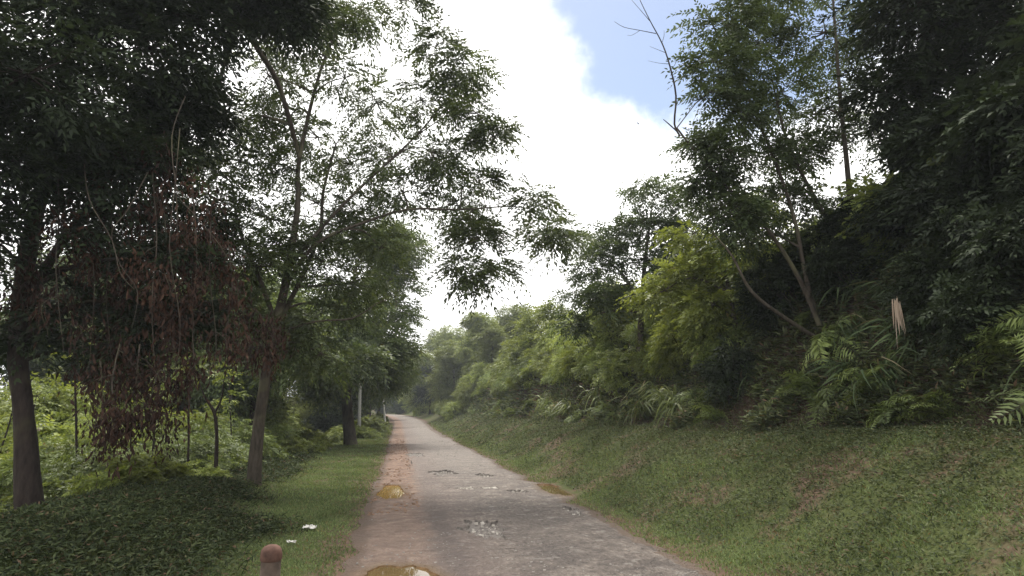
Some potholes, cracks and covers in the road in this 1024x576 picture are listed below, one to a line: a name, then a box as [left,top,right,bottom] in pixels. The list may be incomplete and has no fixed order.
pothole [376,485,404,499]
pothole [561,506,582,515]
pothole [364,565,440,576]
pothole [537,484,574,496]
pothole [455,519,508,540]
